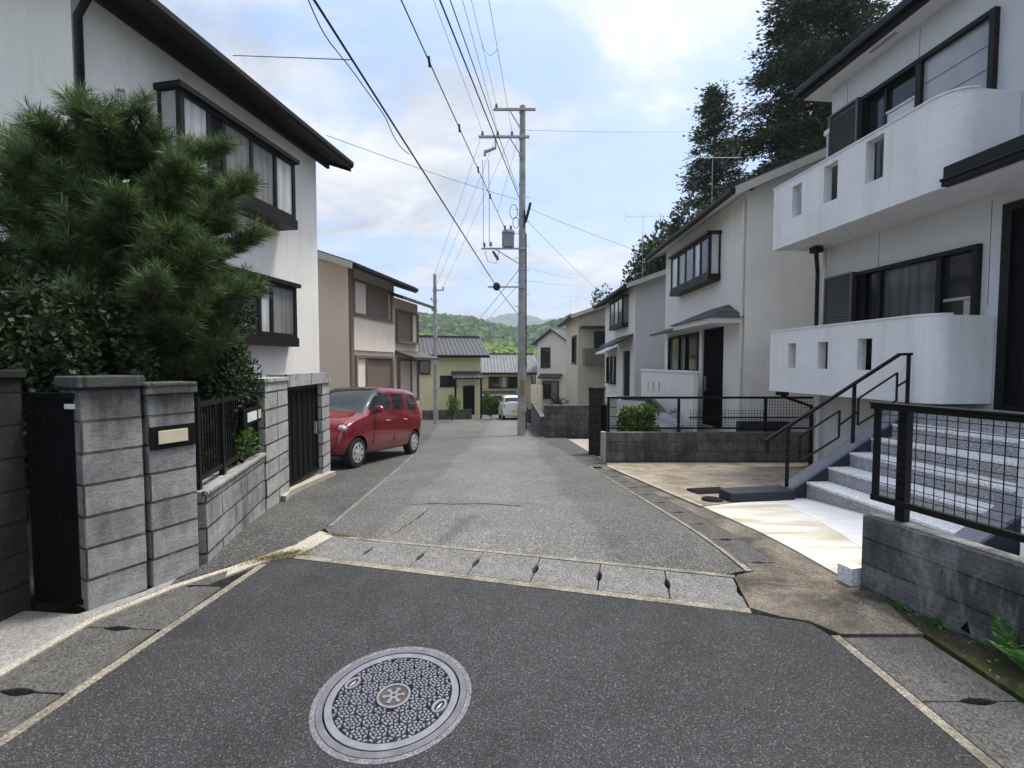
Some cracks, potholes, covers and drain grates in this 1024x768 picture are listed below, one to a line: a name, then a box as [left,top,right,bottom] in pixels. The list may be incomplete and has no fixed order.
crack [393,503,512,535]
manhole cover [309,647,472,765]
